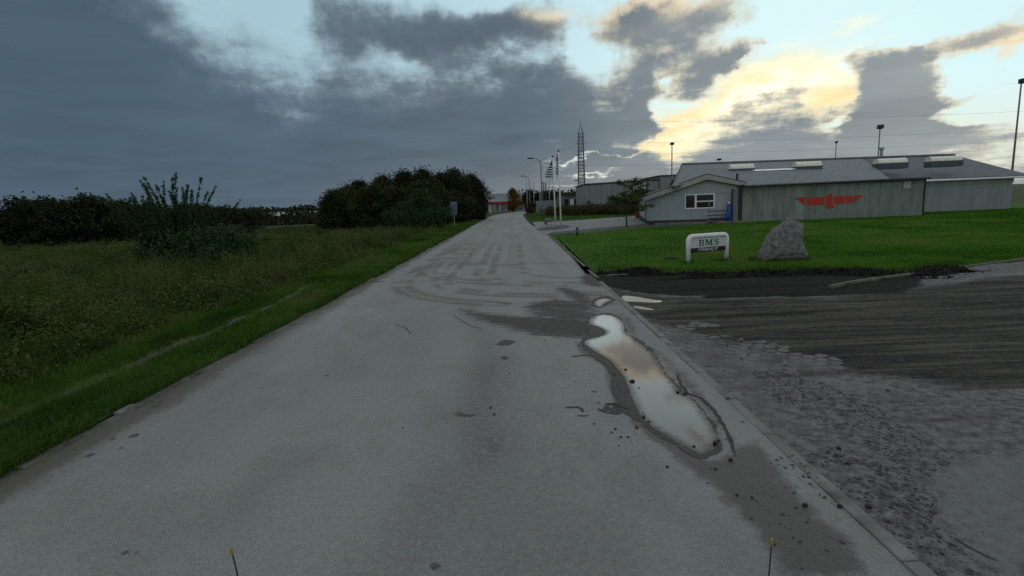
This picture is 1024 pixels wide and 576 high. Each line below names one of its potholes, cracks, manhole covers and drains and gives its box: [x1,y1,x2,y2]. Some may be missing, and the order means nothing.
pothole [591,296,616,308]
pothole [581,313,723,459]
